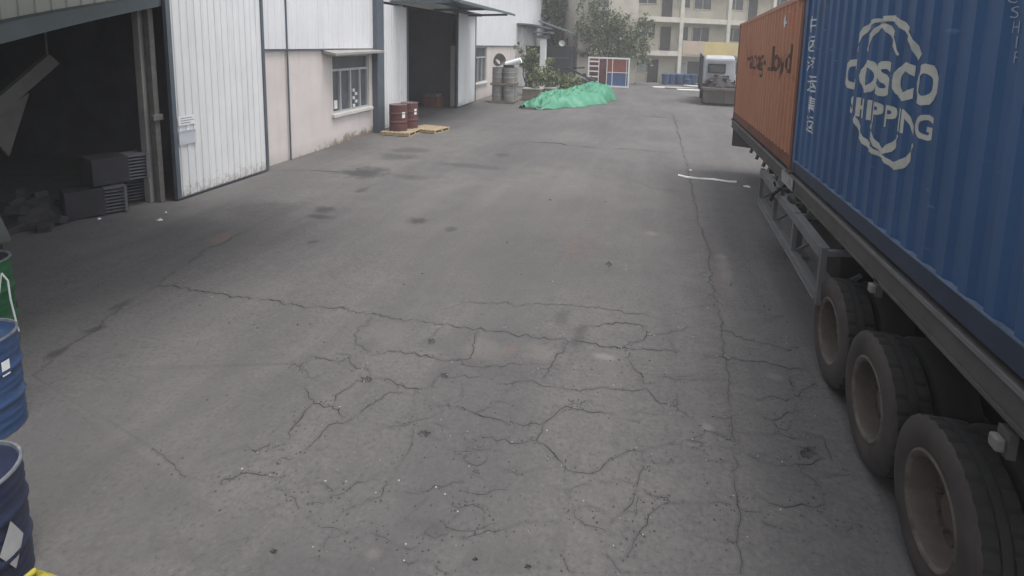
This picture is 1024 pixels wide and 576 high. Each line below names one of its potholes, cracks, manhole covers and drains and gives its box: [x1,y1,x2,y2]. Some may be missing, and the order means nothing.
crack [403,481,504,573]
crack [156,234,691,418]
crack [252,354,420,460]
crack [389,401,673,555]
crack [290,478,388,545]
crack [673,117,861,575]
